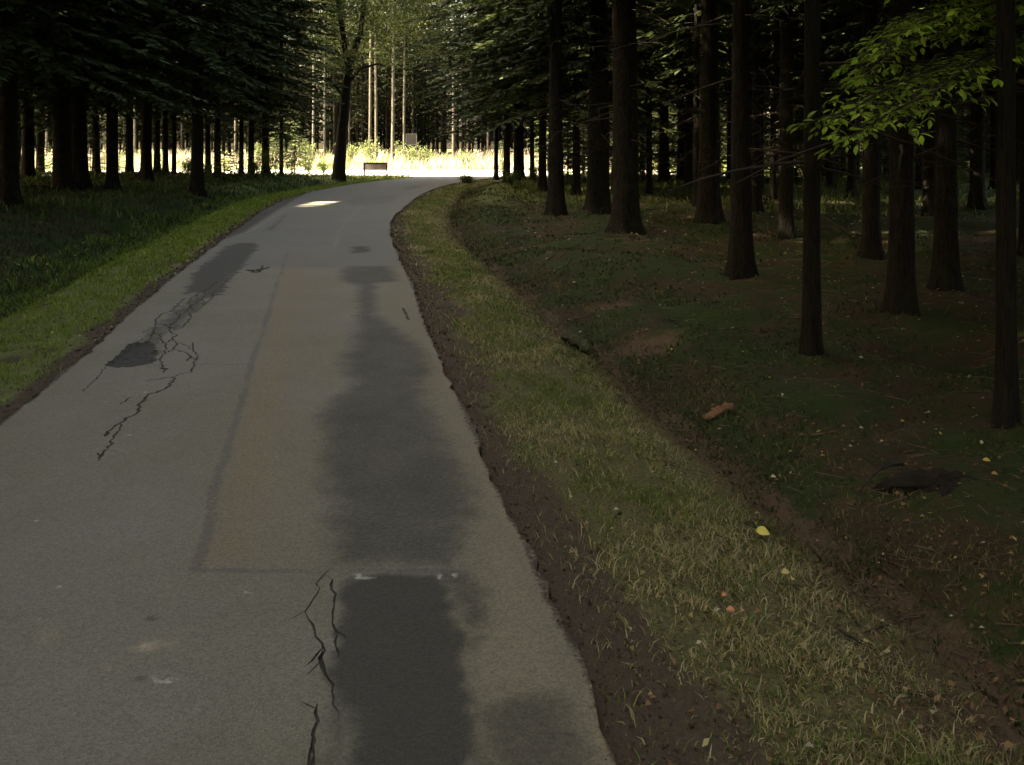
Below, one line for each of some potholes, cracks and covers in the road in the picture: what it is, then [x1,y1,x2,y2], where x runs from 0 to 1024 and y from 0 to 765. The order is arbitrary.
pothole [104,341,159,368]
crack [83,273,236,461]
crack [291,570,347,765]
